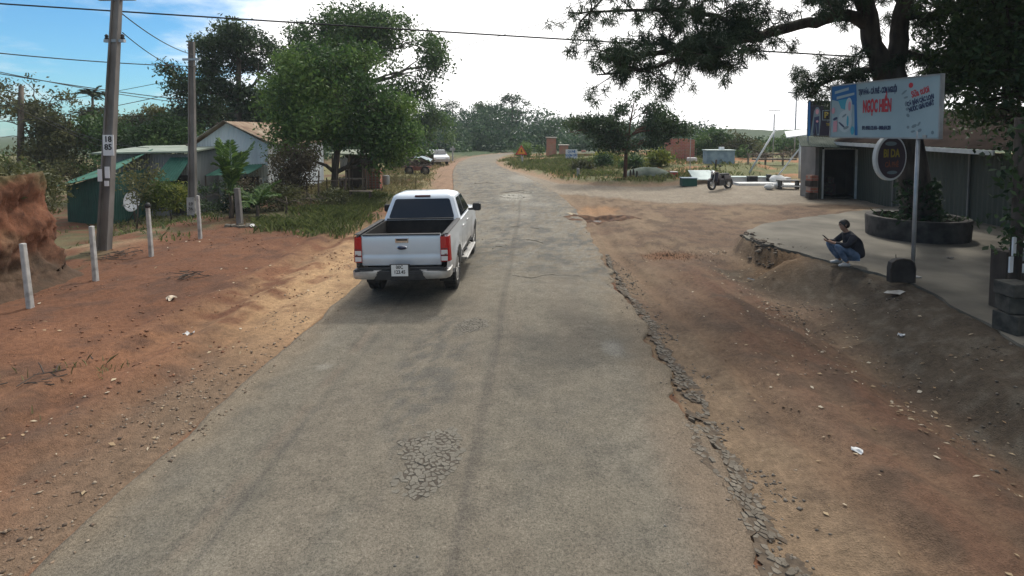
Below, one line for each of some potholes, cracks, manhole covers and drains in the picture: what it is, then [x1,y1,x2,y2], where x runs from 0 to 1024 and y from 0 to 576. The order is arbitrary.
crack [390,426,466,501]
pothole [563,214,641,224]
